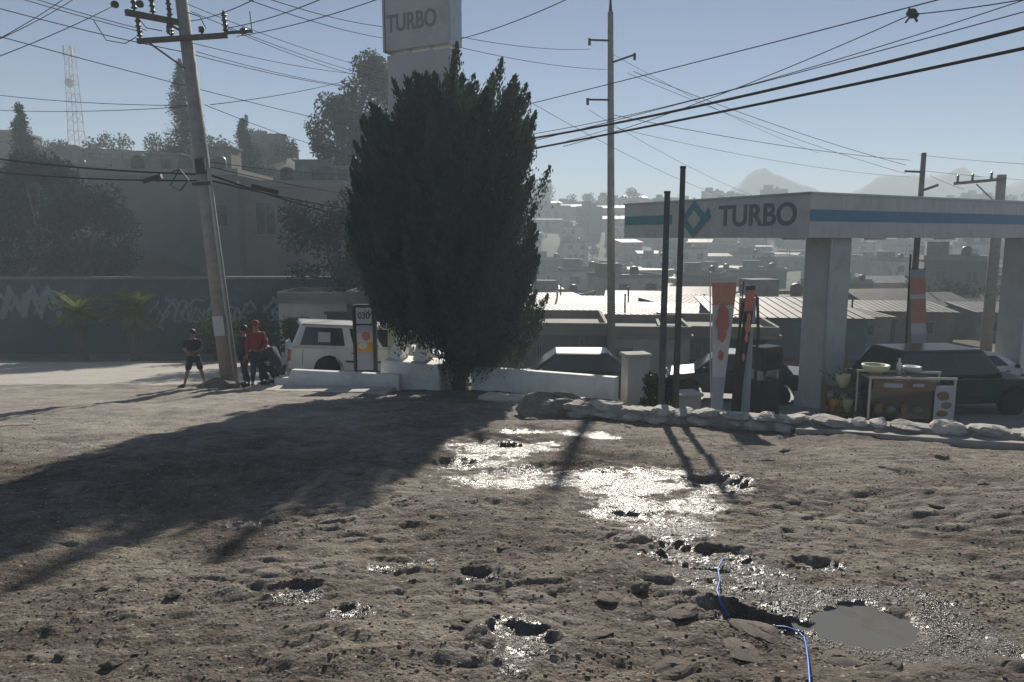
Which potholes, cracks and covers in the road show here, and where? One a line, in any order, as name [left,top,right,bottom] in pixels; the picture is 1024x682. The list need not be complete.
pothole [463,612,569,667]
pothole [687,592,812,635]
pothole [608,534,771,567]
pothole [798,597,935,655]
pothole [775,554,846,571]
pothole [448,564,509,583]
pothole [322,601,382,621]
pothole [263,578,339,605]
pothole [349,555,447,573]
